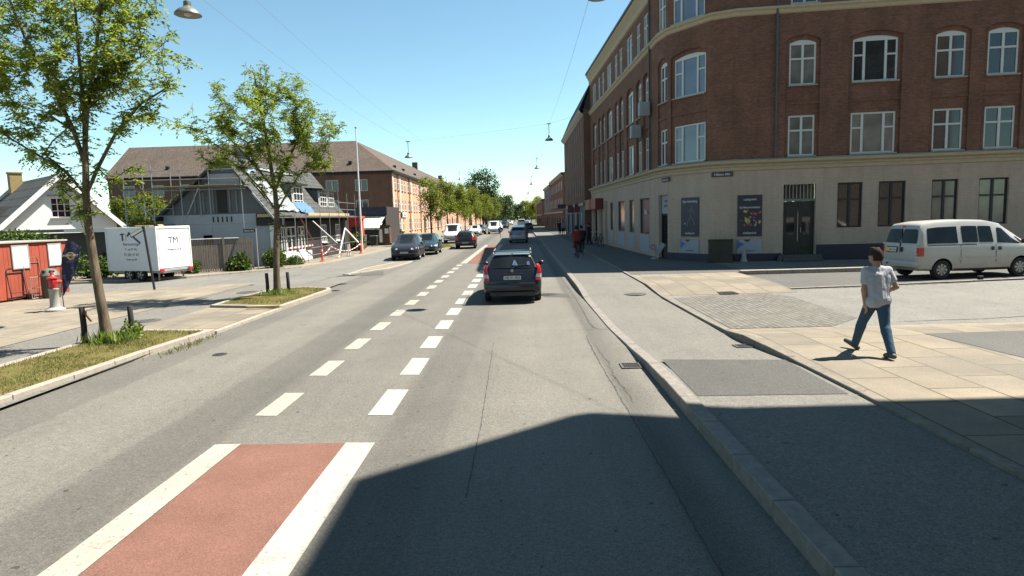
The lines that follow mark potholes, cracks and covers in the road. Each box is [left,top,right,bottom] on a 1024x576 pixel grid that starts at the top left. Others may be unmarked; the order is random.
crack [465,342,494,498]
crack [568,329,633,403]
